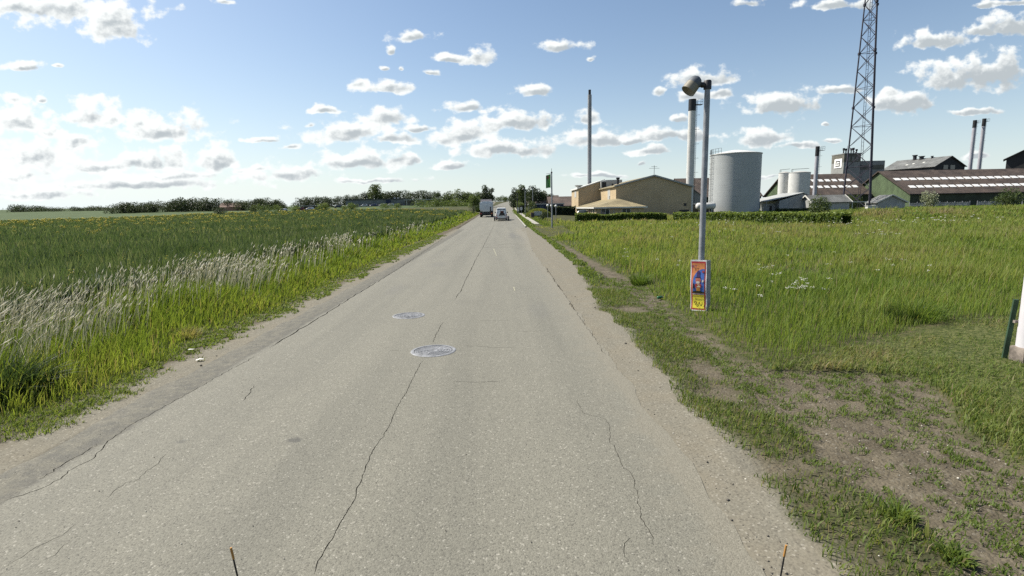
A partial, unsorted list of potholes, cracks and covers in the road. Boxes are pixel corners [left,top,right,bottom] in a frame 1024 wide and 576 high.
crack [577,402,654,558]
crack [314,363,421,574]
manhole cover [410,345,456,357]
